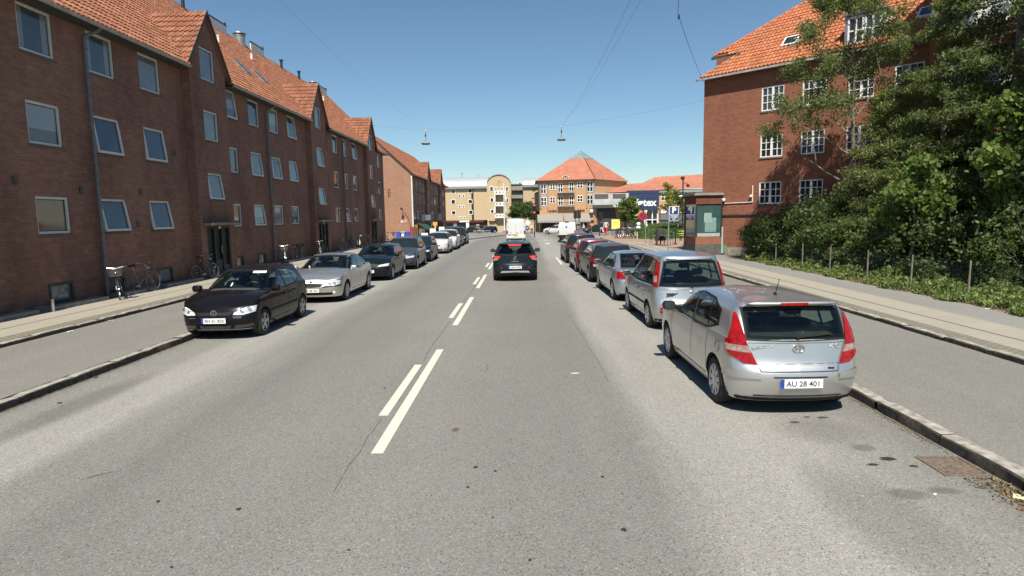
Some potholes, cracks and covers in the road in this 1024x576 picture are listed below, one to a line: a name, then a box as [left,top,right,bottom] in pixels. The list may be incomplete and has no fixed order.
drain grate [914,456,992,476]
